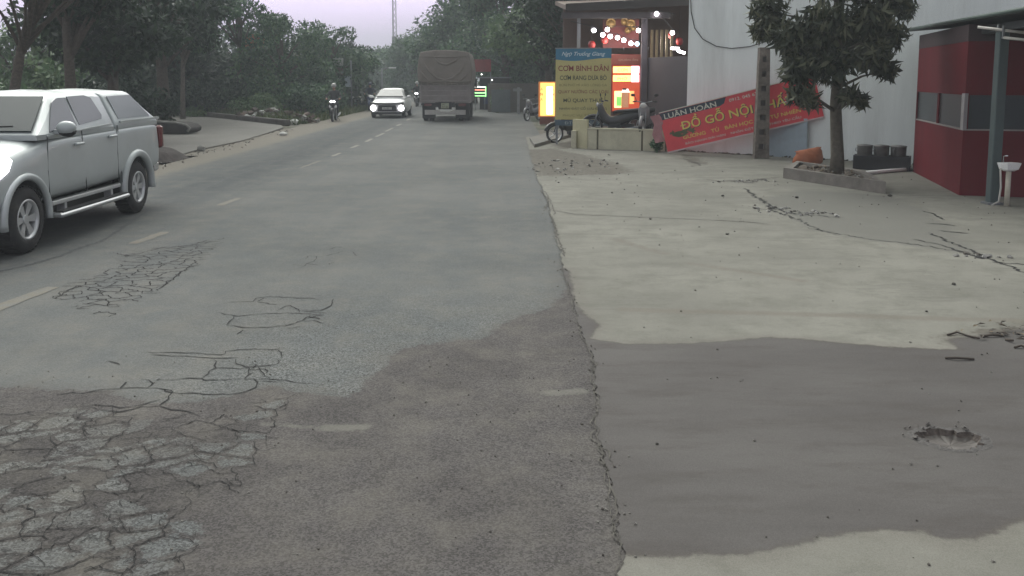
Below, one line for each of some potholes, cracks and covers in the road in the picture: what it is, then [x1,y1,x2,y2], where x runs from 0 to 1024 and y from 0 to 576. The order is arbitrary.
crack [671,158,1024,272]
crack [52,238,224,316]
crack [0,296,333,576]
pothole [906,426,995,453]
